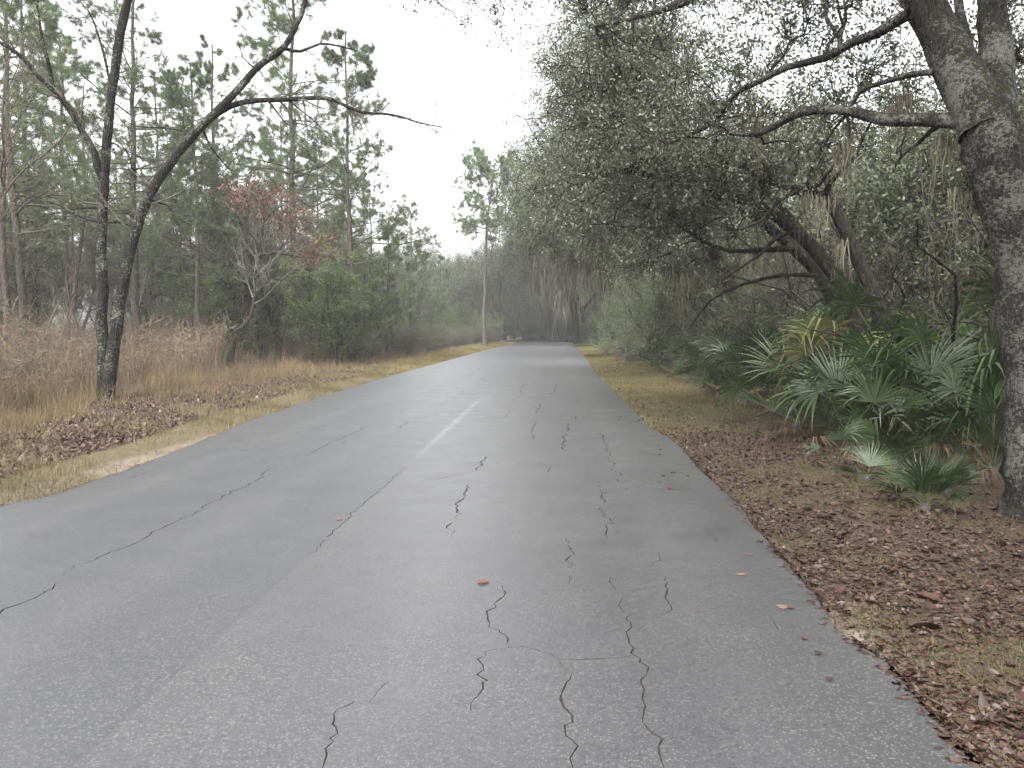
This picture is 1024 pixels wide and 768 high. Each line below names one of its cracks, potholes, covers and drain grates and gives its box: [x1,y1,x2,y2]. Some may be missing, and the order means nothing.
crack [609,578,664,768]
crack [322,680,390,768]
crack [0,428,362,613]
crack [446,457,486,534]
crack [598,416,643,542]
crack [470,586,628,768]
crack [652,553,673,612]
